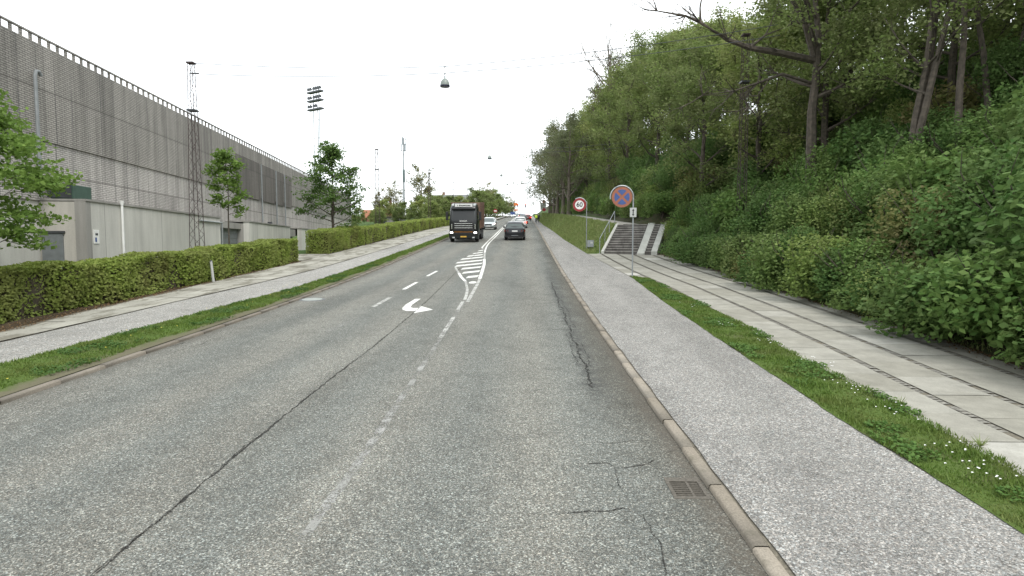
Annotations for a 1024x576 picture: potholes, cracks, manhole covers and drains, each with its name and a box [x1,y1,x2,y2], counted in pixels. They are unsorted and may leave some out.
drain grate [663,477,712,499]
crack [562,508,667,575]
crack [551,283,597,390]
